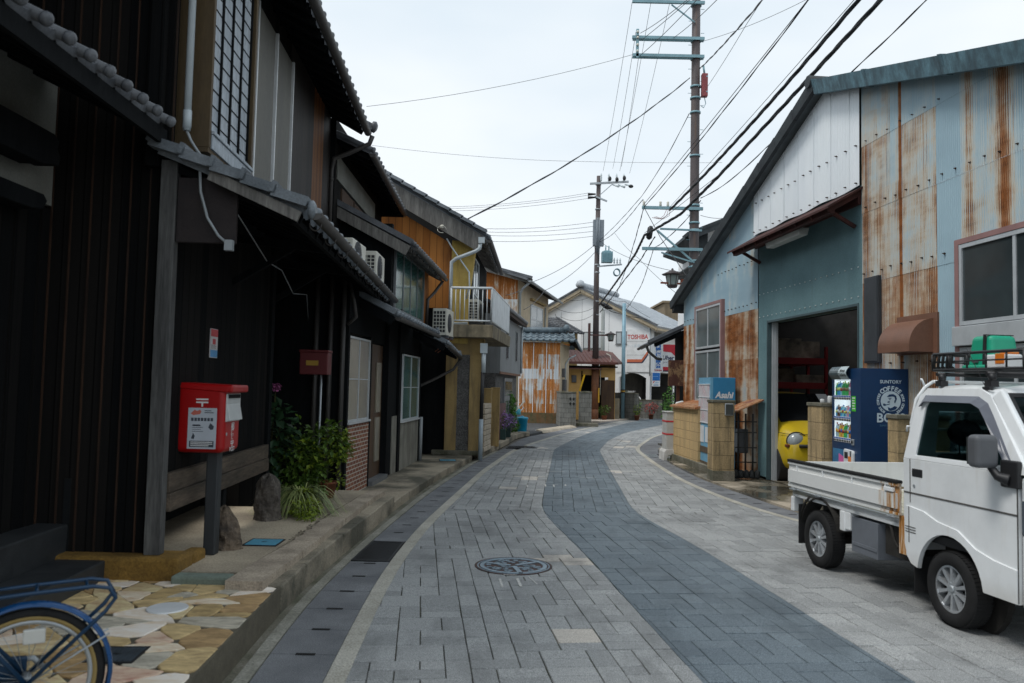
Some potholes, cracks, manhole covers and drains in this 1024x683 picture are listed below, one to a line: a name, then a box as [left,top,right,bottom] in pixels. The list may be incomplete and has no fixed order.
utility cover [242,538,286,547]
manhole cover [475,557,552,576]
drain grate [351,541,404,563]
